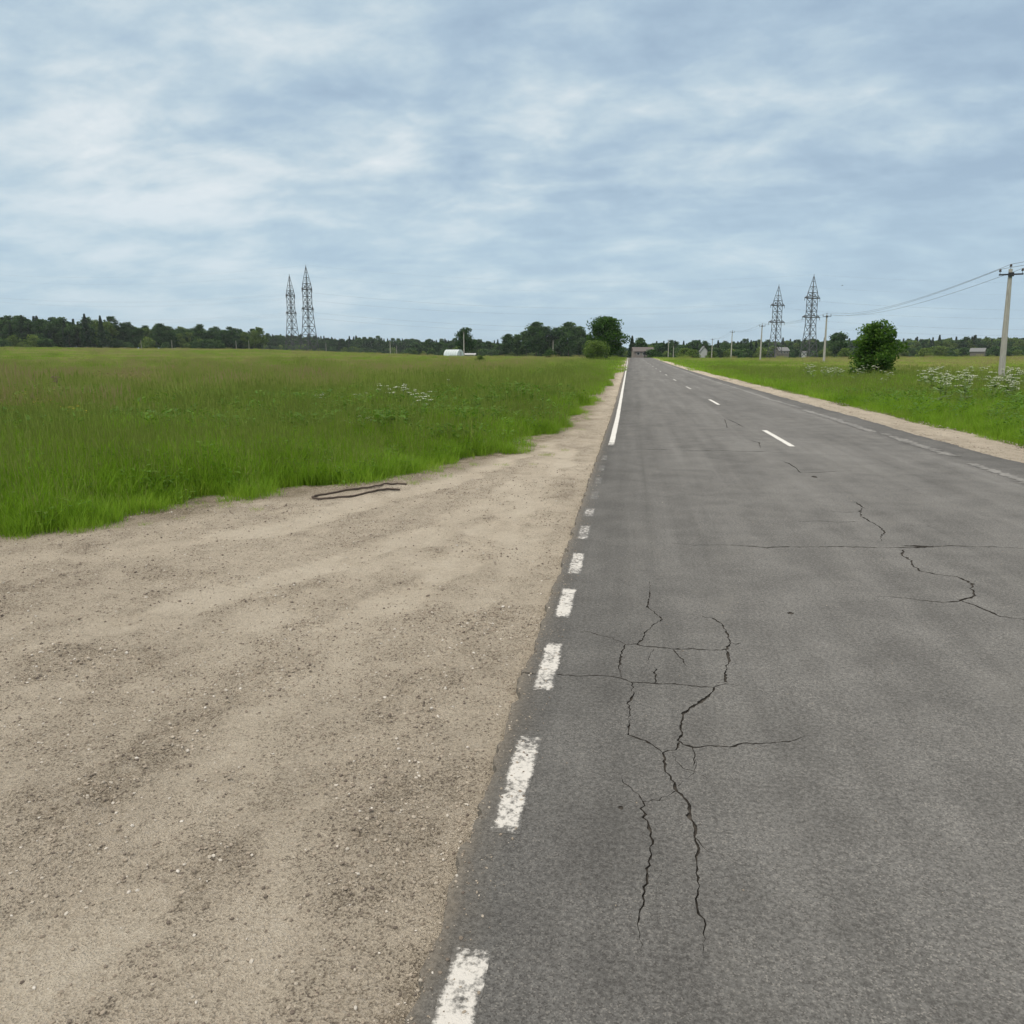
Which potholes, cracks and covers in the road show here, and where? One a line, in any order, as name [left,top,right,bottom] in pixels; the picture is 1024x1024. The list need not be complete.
crack [674,502,1024,620]
crack [636,420,833,473]
crack [522,581,805,957]
